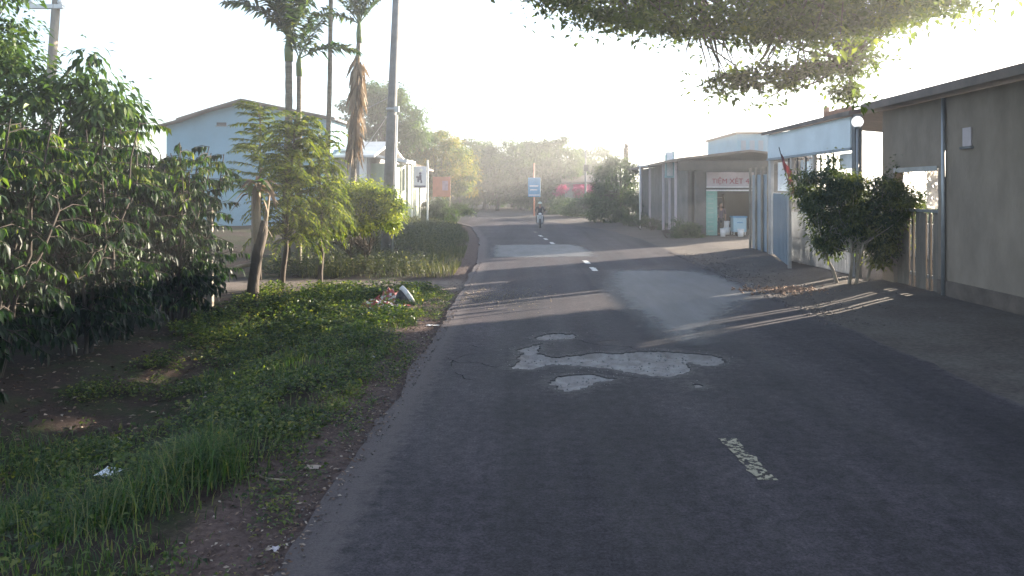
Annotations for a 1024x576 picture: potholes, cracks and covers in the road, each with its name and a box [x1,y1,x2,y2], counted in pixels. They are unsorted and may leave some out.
crack [448,345,508,380]
pothole [529,331,583,341]
pothole [501,342,730,380]
pothole [541,370,624,392]
